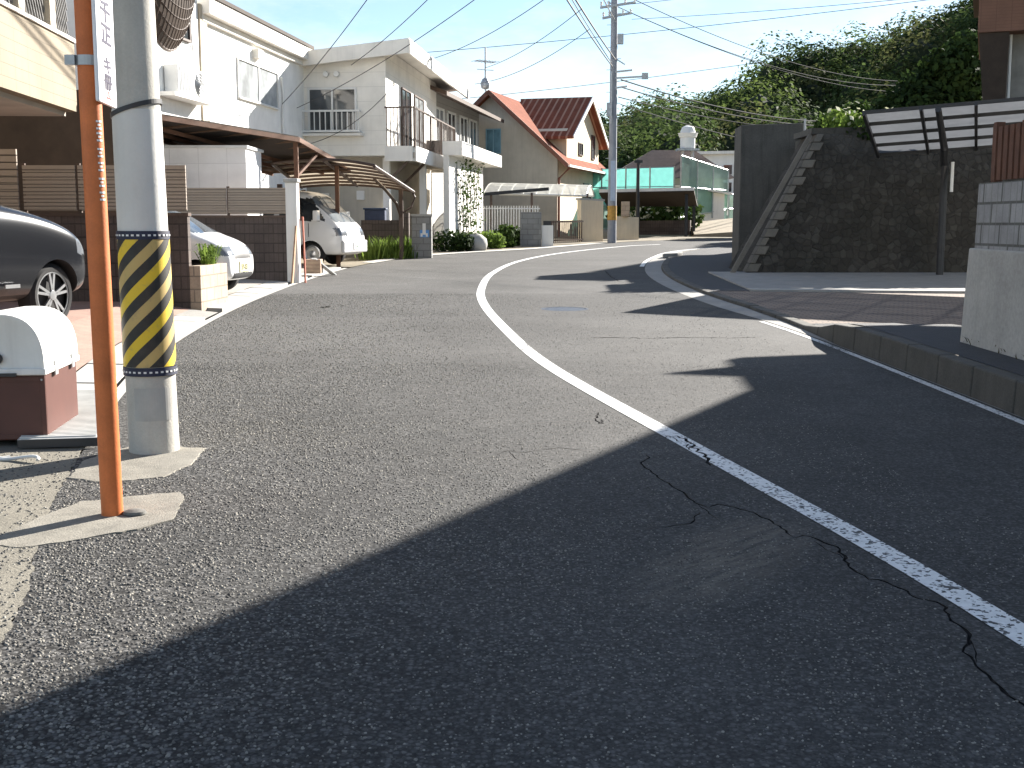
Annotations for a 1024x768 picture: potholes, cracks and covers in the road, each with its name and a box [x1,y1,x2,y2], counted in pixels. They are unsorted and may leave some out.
crack [676,436,711,466]
crack [640,455,1024,706]
